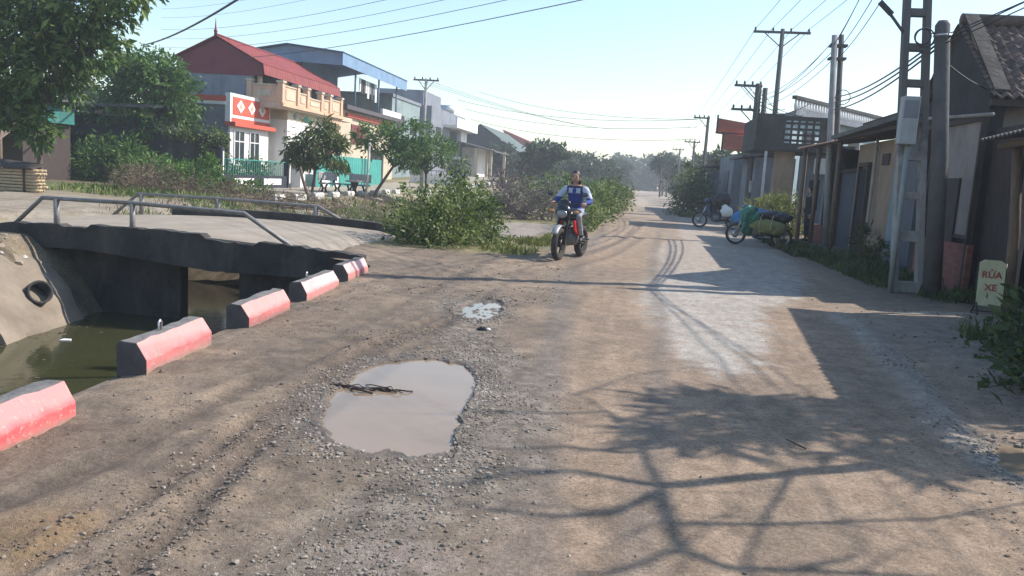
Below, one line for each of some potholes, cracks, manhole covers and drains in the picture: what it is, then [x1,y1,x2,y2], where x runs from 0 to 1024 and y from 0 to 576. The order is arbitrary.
pothole [308,354,485,464]
pothole [987,440,1024,478]
pothole [450,297,506,321]
